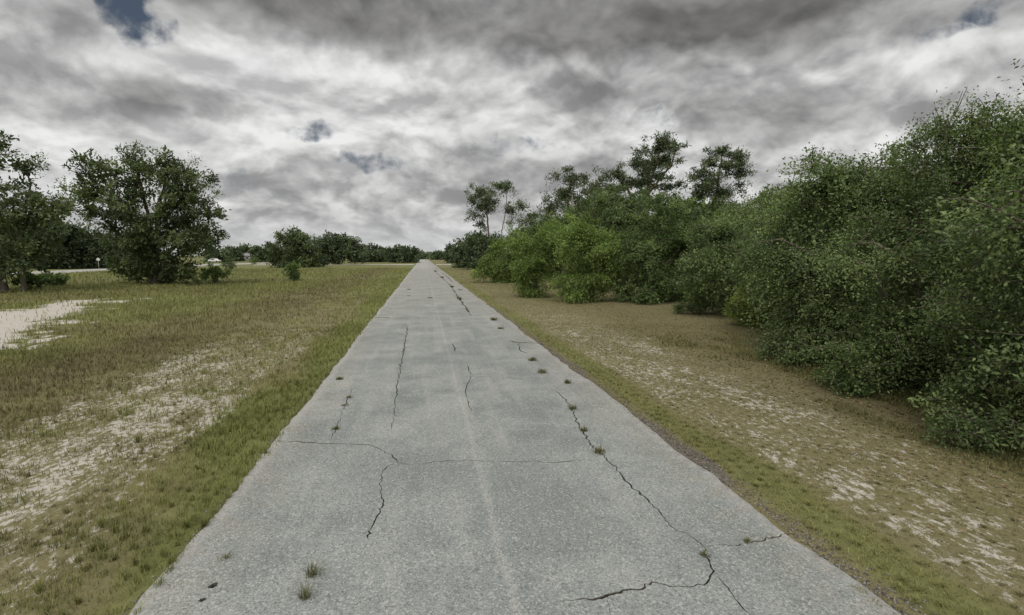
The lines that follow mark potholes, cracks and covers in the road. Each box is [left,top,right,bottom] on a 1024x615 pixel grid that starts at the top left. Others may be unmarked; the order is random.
crack [435,268,471,315]
crack [391,329,408,427]
crack [556,391,789,615]
crack [268,399,575,538]
